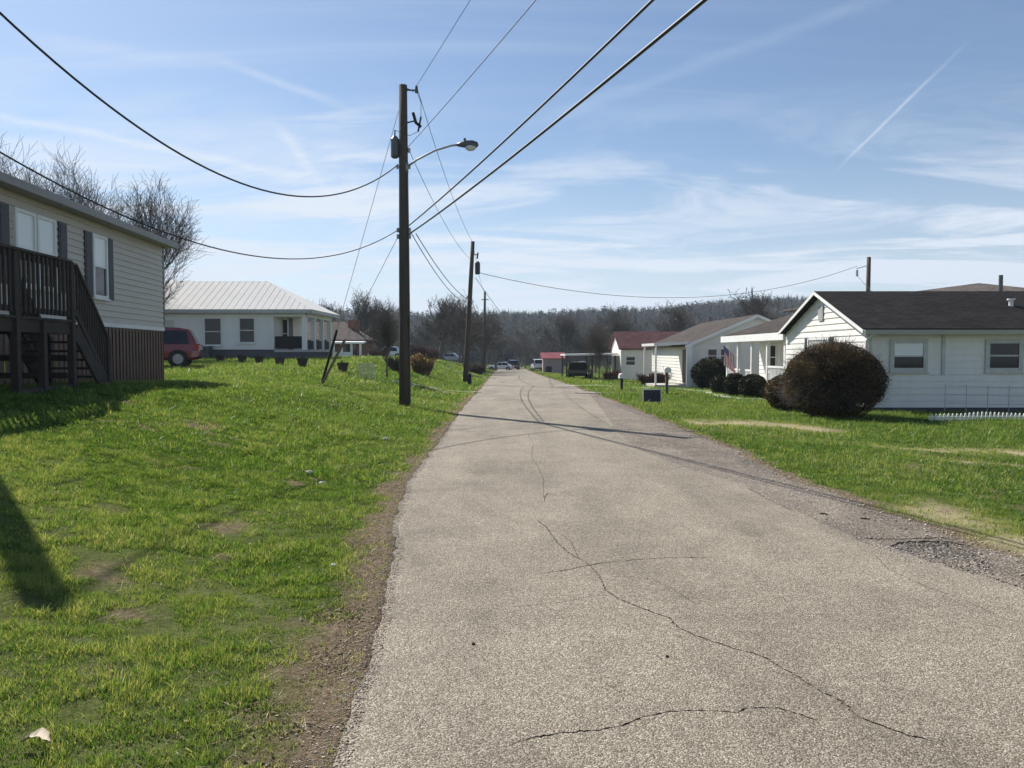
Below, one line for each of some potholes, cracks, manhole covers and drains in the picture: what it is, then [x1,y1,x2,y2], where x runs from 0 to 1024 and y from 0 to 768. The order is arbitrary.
pothole [890,540,995,575]
crack [513,520,935,744]
crack [857,537,996,615]
